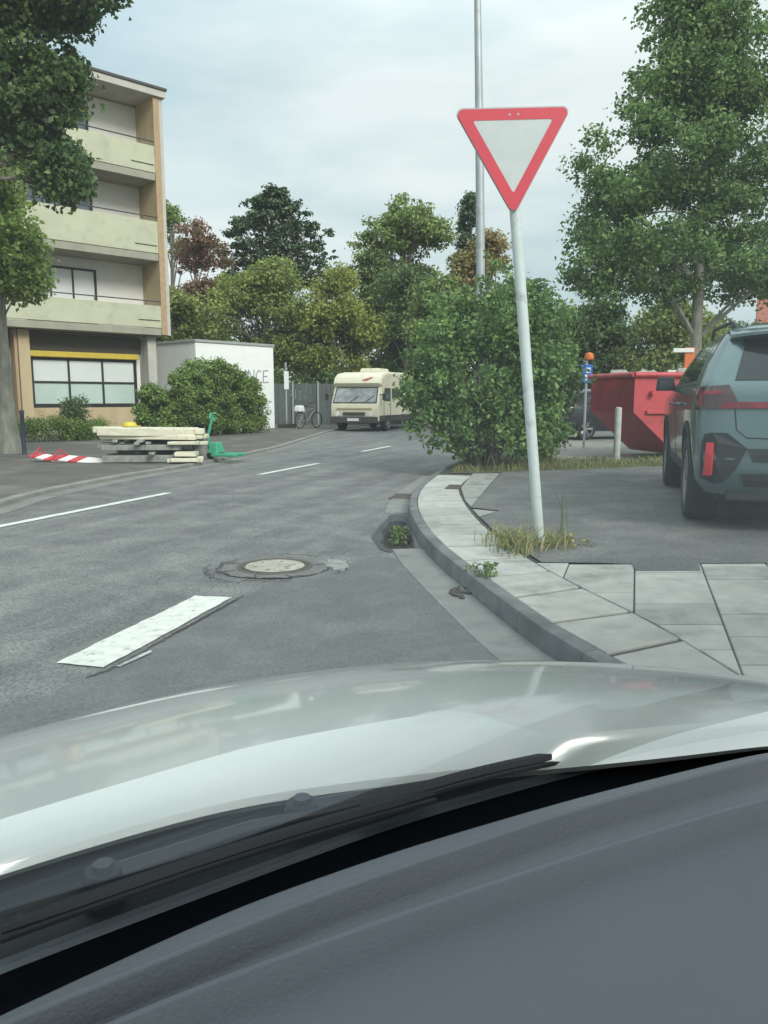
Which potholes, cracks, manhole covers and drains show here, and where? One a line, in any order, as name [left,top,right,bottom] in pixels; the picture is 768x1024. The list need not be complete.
manhole cover [220,556,349,578]
